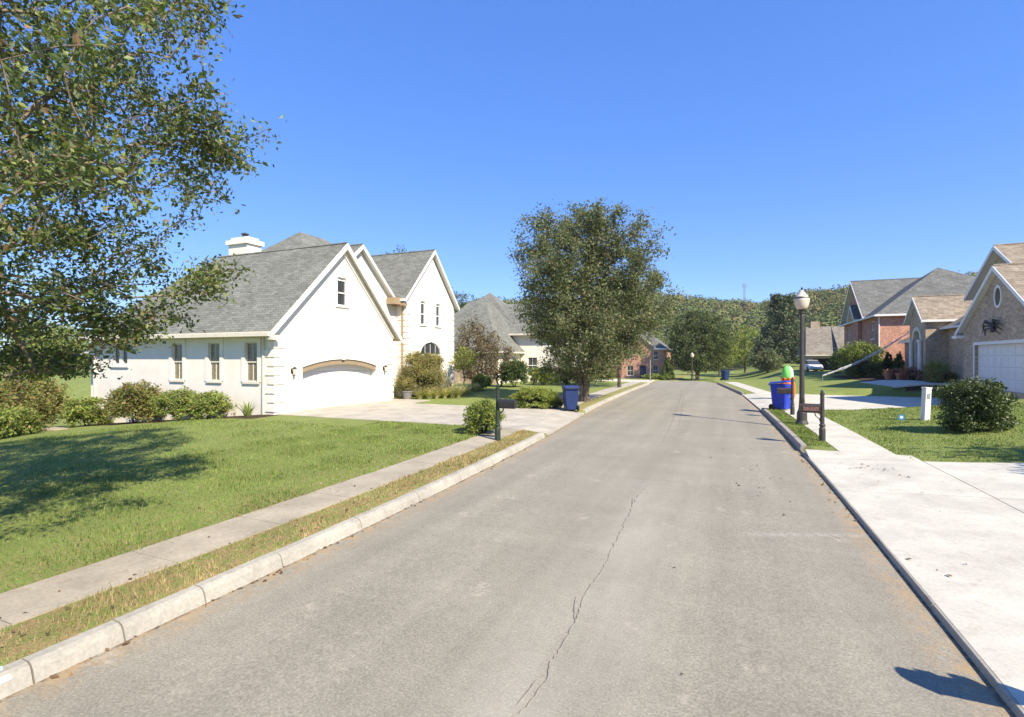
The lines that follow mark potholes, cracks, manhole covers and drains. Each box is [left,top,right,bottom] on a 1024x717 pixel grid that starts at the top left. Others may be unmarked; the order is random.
crack [513,484,649,717]
